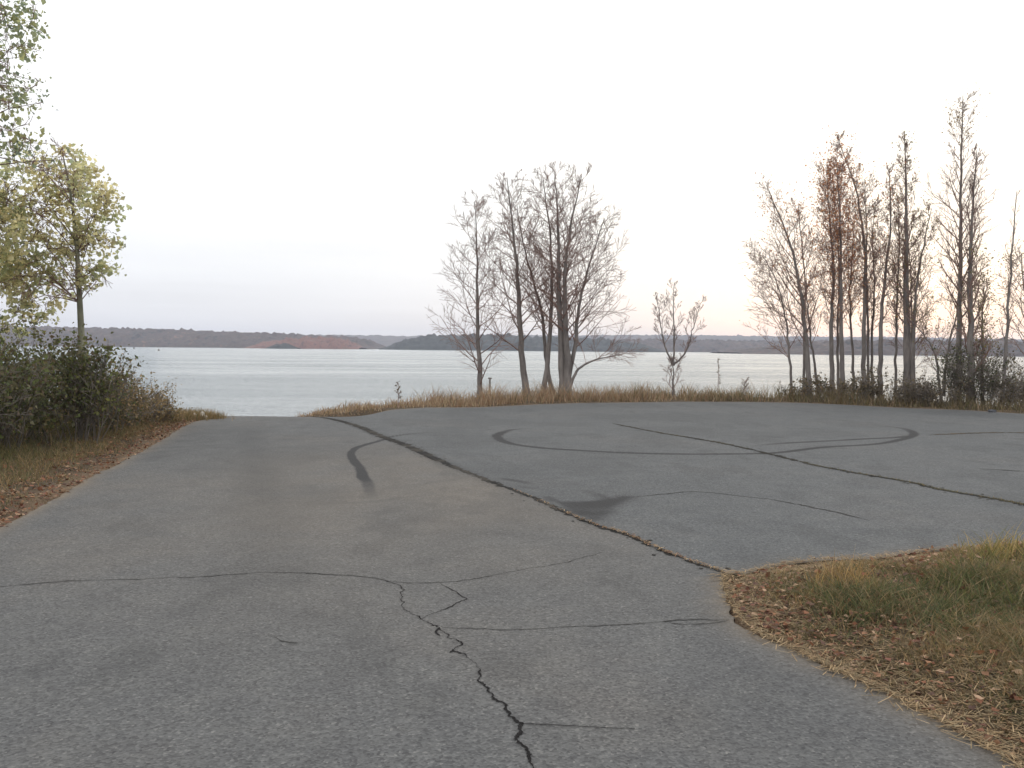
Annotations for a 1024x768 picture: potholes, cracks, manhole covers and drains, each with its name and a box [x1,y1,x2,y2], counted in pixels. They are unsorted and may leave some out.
crack [617,424,1024,505]
crack [637,491,870,521]
crack [0,554,723,768]
